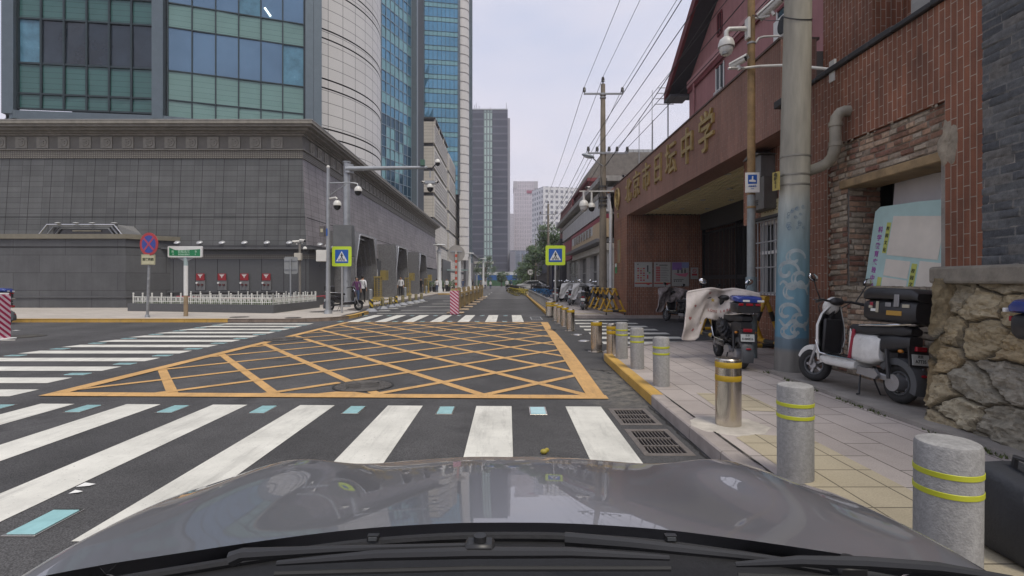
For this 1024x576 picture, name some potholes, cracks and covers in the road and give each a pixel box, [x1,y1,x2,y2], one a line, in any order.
drain grate [608,408,663,425]
drain grate [624,429,696,456]
manhole cover [332,380,394,392]
